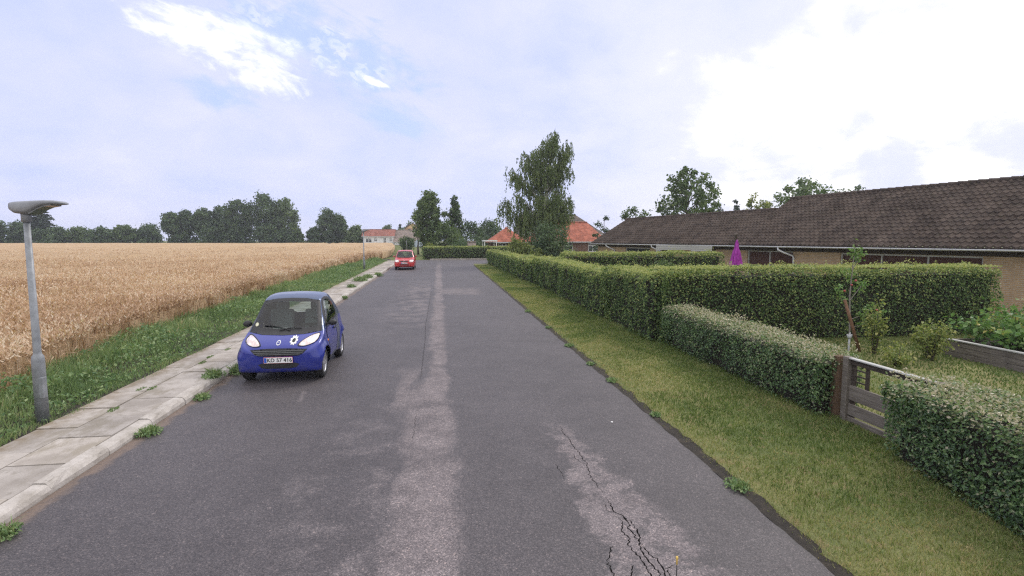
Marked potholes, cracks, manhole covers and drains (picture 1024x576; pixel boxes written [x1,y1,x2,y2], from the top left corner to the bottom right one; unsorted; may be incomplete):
crack [556,428,672,576]
